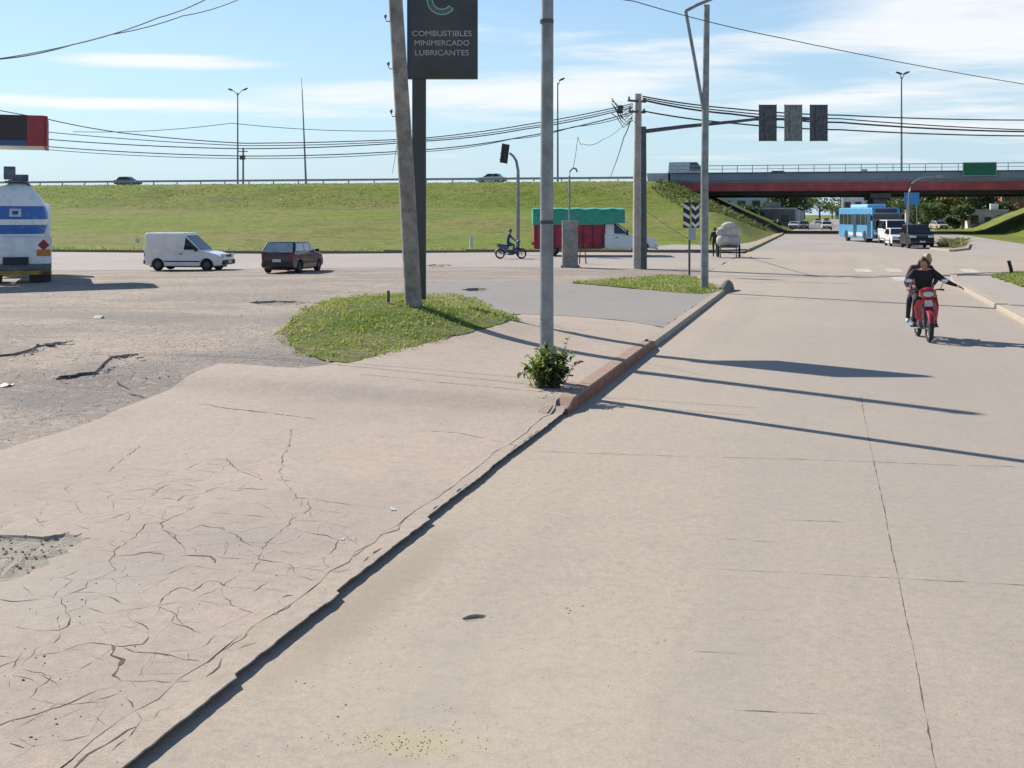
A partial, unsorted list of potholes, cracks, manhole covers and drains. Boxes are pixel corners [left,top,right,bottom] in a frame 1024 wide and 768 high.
crack [355,430,539,565]
crack [0,433,365,768]
pothole [0,532,90,582]
